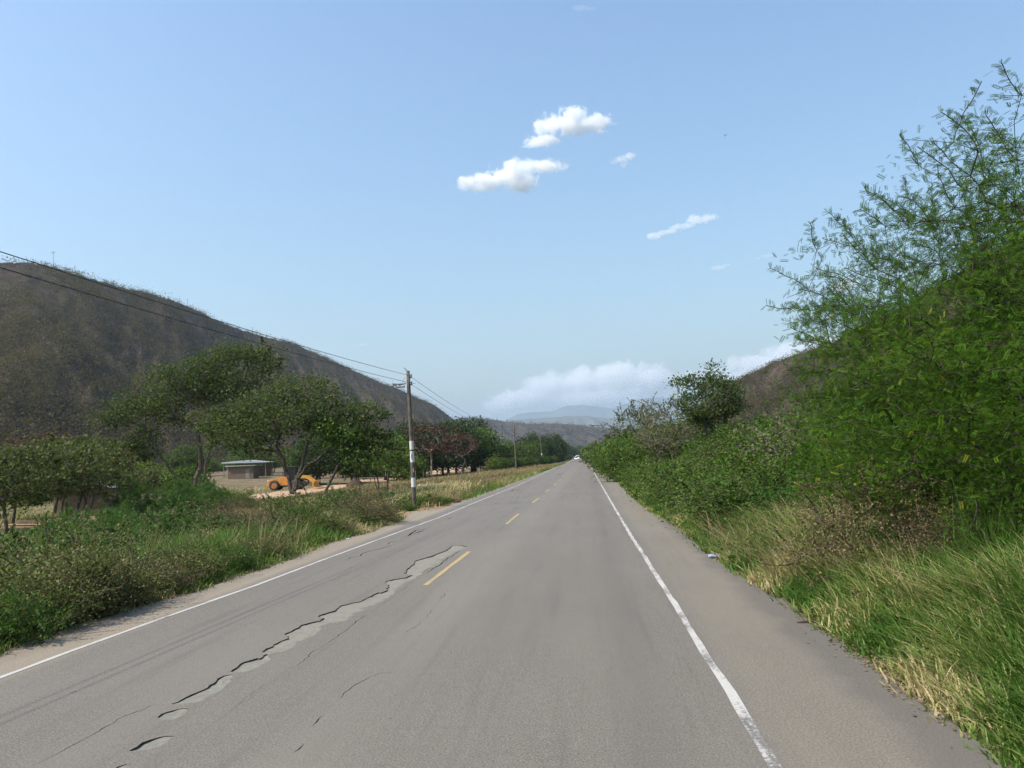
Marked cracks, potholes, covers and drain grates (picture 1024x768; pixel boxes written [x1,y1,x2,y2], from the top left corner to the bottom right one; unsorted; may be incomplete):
pothole [129,736,173,751]
crack [39,704,154,763]
pothole [158,708,188,722]
